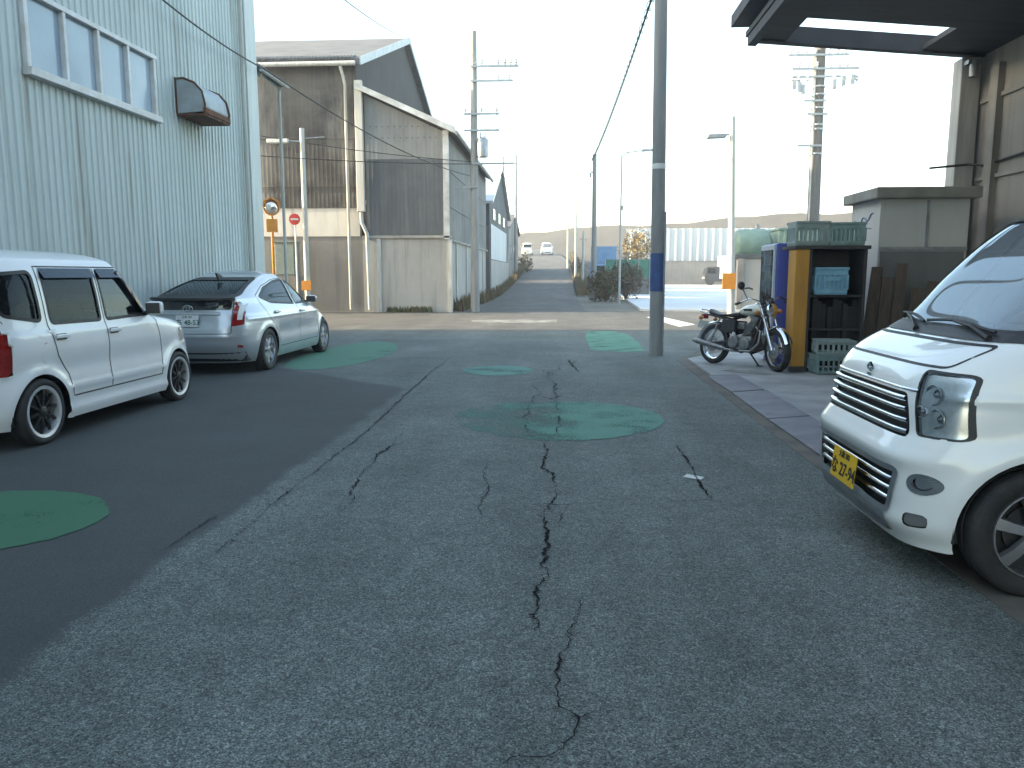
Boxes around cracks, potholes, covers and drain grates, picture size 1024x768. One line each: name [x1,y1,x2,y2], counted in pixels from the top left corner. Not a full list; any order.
crack [677,445,711,501]
crack [337,435,401,513]
crack [421,360,624,767]
